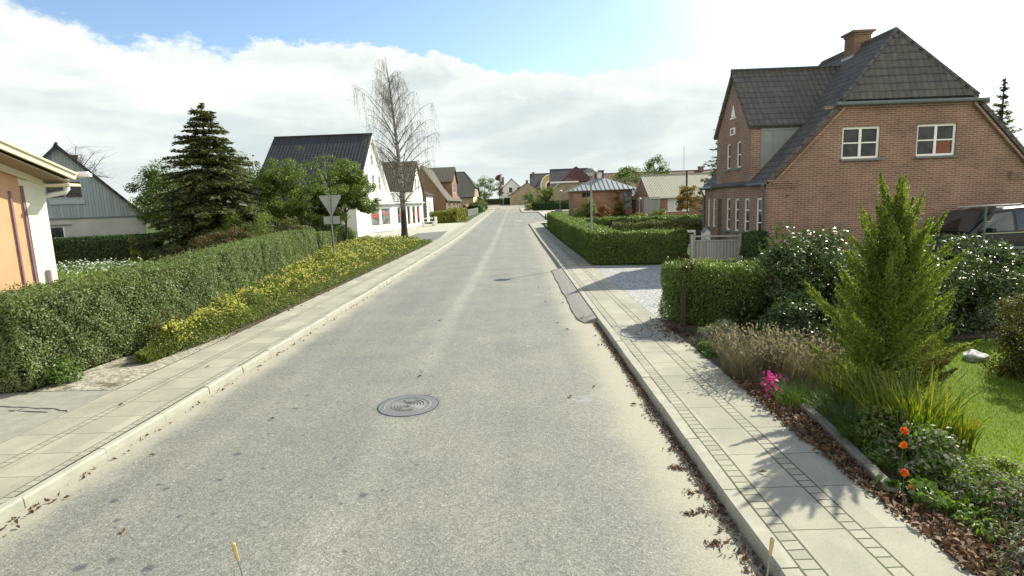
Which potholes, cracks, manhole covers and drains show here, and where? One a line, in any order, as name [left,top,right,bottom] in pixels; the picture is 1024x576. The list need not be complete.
manhole cover [377,395,439,417]
